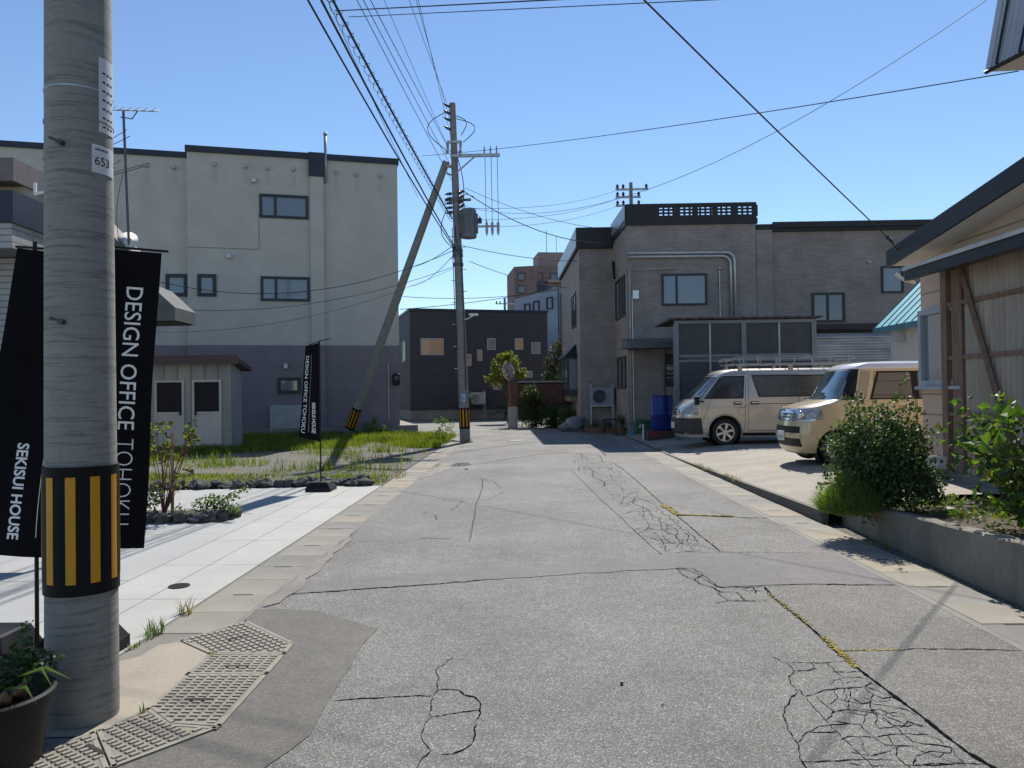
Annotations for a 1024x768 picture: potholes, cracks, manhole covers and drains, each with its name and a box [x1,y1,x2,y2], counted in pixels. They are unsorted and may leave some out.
crack [774,657,980,768]
crack [336,657,481,768]
crack [678,568,890,603]
crack [435,452,621,541]
crack [603,479,704,552]
